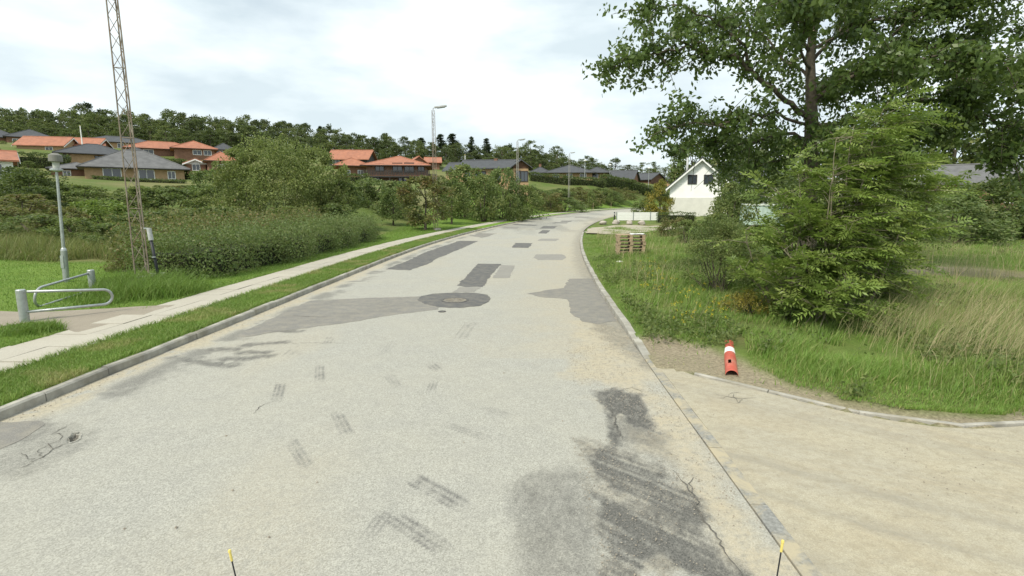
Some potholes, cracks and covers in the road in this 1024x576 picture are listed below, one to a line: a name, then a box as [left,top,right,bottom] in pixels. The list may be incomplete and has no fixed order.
crack [673,470,744,576]
crack [21,427,68,467]
